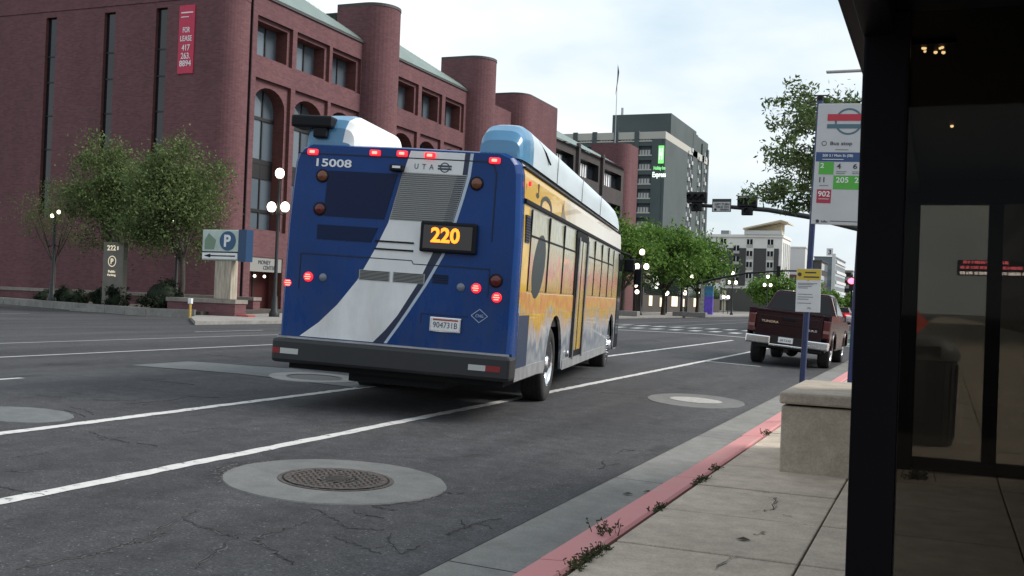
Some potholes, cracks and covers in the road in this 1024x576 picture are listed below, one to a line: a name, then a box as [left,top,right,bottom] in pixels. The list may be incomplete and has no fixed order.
crack [18,492,502,569]
manhole cover [222,459,447,505]
